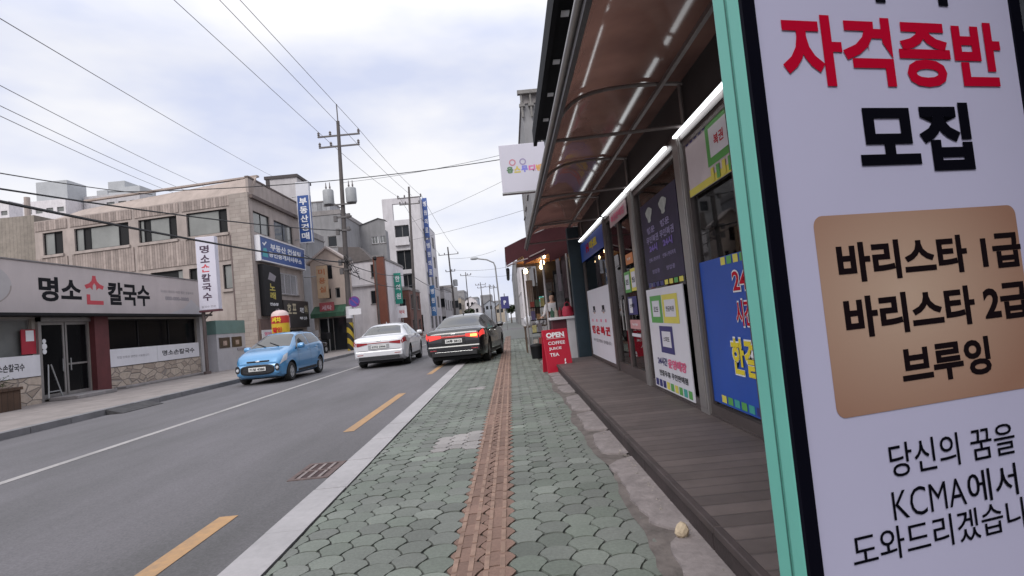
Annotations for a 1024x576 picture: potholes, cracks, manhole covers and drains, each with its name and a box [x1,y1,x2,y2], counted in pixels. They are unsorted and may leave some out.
drain grate [287,460,347,482]
